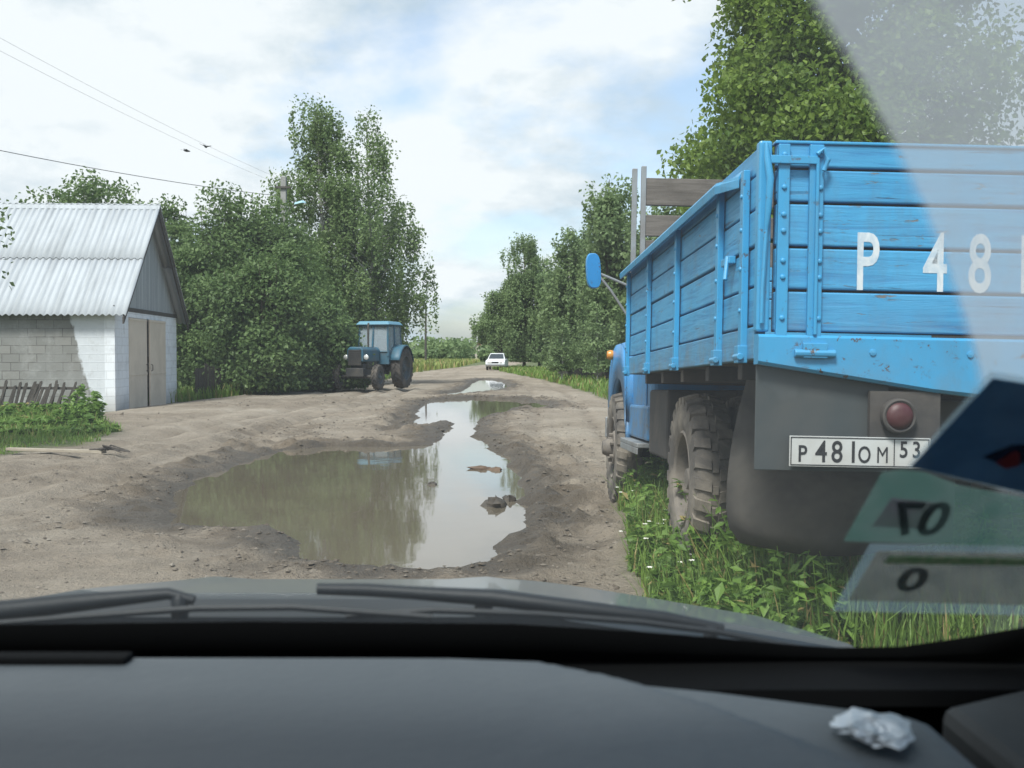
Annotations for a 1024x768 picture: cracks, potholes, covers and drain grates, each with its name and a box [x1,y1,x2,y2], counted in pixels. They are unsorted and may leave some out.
pothole [434,378,516,395]
pothole [122,433,568,575]
